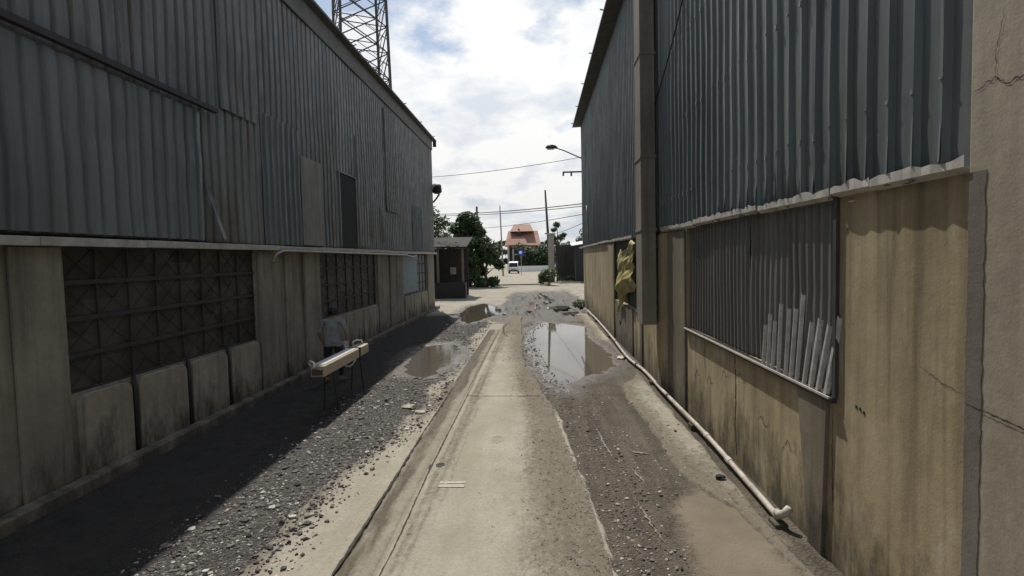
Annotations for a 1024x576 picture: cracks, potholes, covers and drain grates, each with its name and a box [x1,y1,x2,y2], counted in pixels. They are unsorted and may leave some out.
pothole [453,303,508,324]
pothole [522,321,626,395]
pothole [391,341,472,378]
